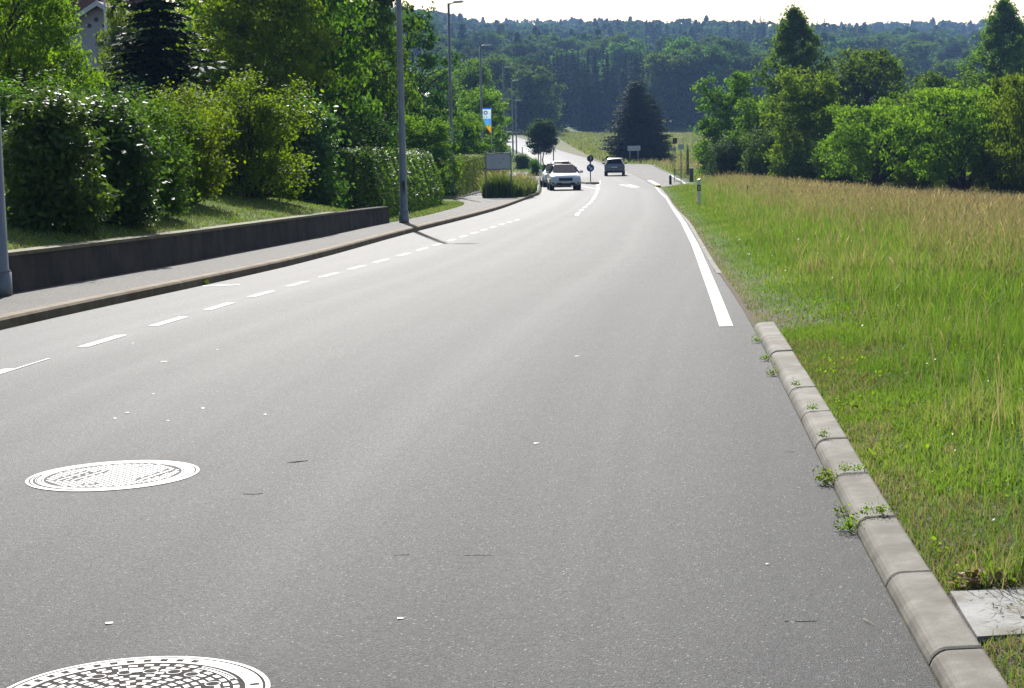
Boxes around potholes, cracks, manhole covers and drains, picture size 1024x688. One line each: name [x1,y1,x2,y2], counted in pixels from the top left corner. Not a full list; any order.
manhole cover [7,656,270,688]
manhole cover [25,460,200,492]
